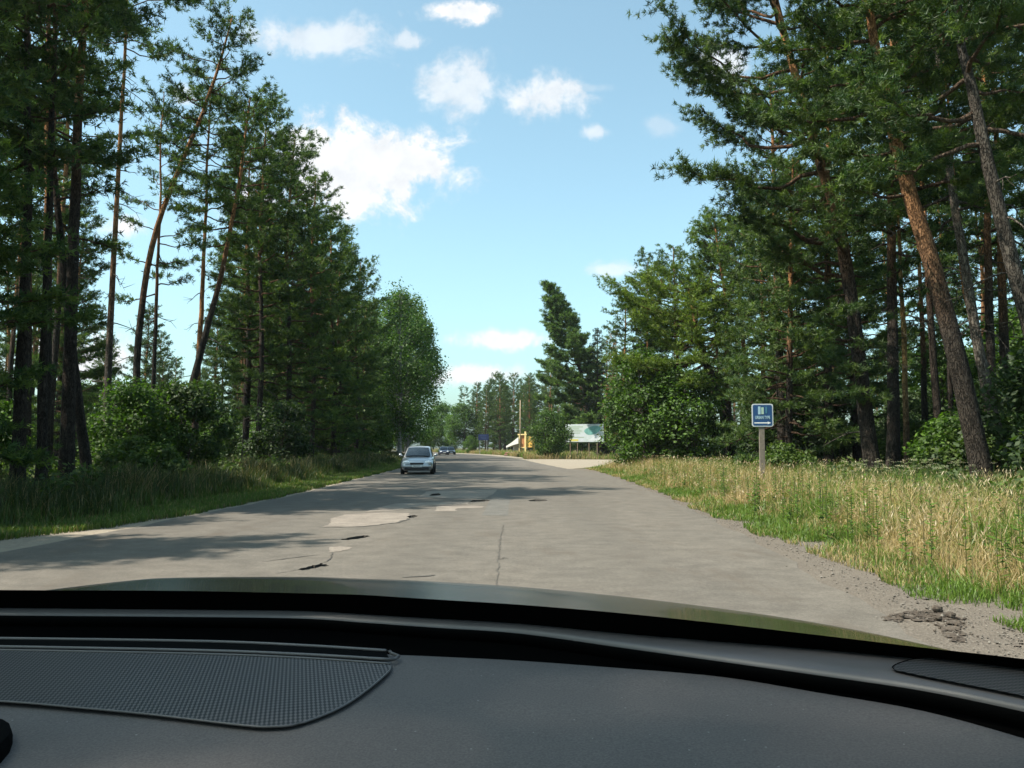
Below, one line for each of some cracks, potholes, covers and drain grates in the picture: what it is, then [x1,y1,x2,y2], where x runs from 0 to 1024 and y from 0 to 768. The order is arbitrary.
pothole [881,610,984,642]
